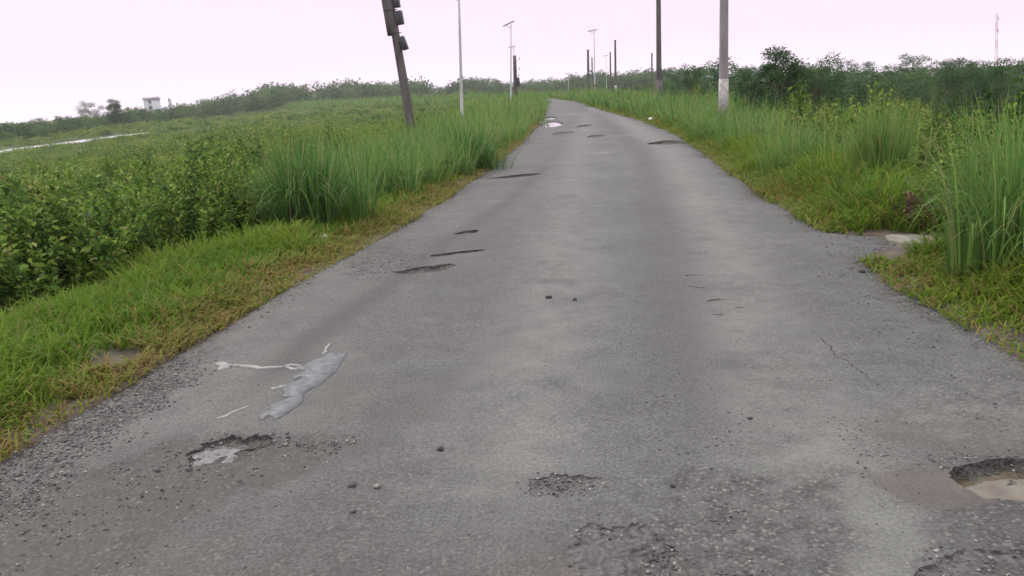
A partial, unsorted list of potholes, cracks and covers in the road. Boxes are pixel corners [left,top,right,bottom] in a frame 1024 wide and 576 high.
pothole [949,457,1024,501]
pothole [393,263,456,274]
pothole [527,473,603,497]
pothole [185,434,274,467]
pothole [563,522,686,576]
pothole [429,249,484,257]
